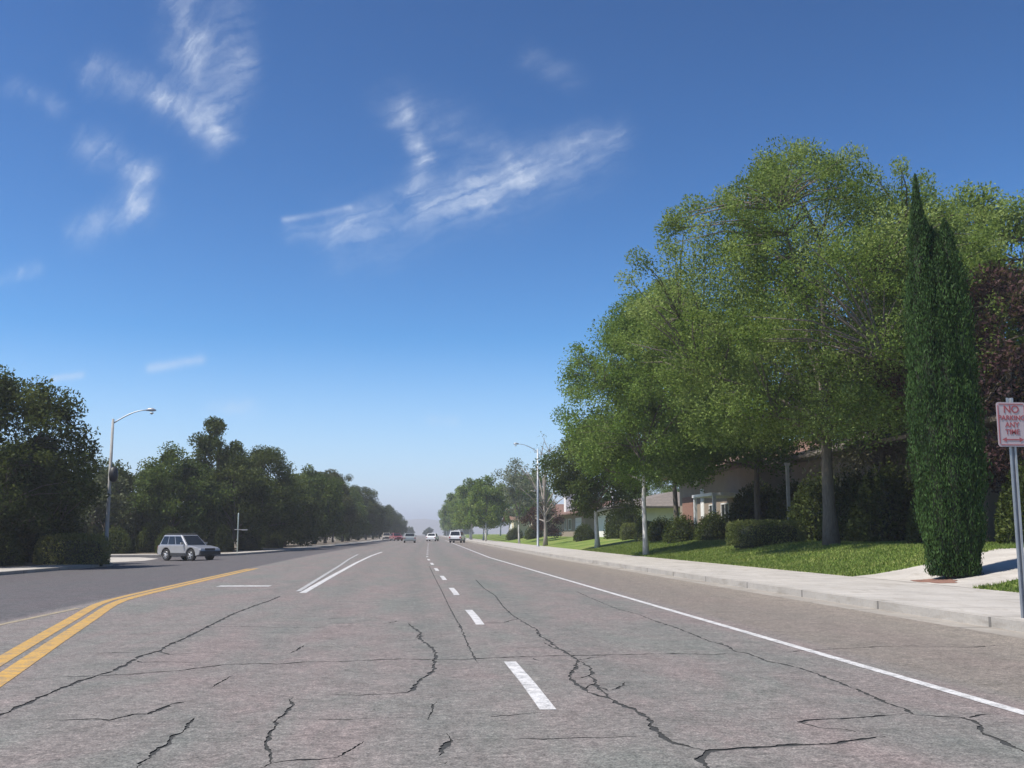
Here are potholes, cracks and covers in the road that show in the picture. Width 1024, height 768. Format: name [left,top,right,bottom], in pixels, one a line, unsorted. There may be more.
crack [0,566,1024,768]
